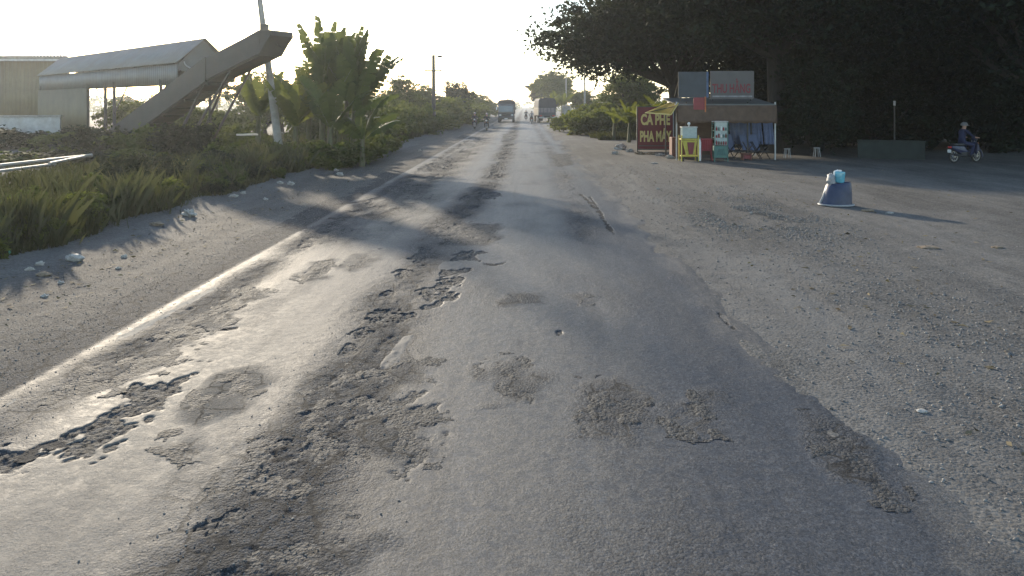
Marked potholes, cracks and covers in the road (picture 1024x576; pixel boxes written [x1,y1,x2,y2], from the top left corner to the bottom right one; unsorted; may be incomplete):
pothole [451,251,485,262]
pothole [435,277,465,291]
pothole [0,445,48,474]
pothole [43,373,199,464]
pothole [440,268,472,280]
pothole [392,270,414,279]
pothole [364,309,417,324]
crack [580,194,614,233]
pothole [408,248,432,267]
pothole [417,287,460,310]
